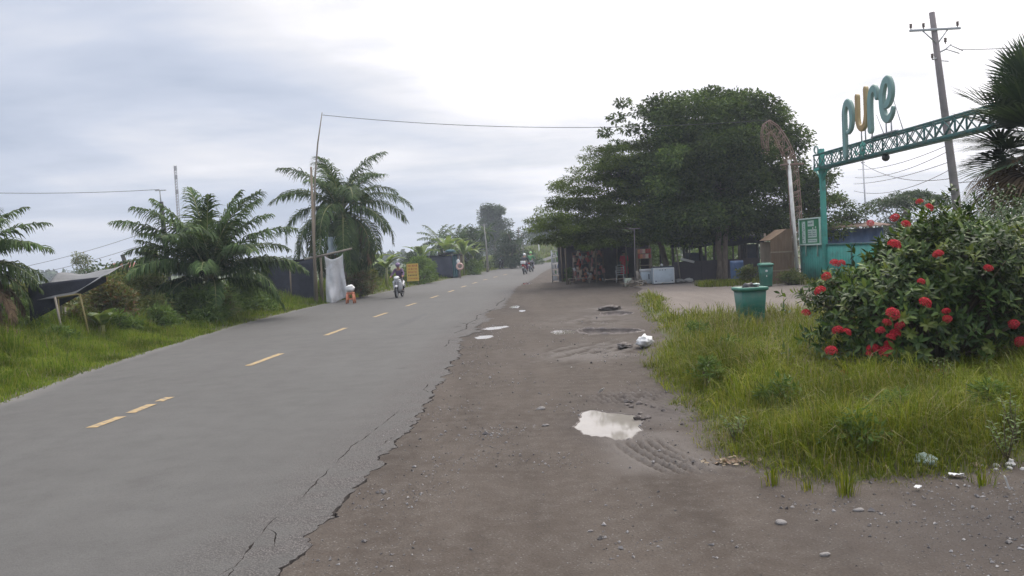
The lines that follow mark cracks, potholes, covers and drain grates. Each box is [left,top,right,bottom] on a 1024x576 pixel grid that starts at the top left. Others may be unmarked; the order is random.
crack [218,298,505,576]
pothole [572,410,644,441]
